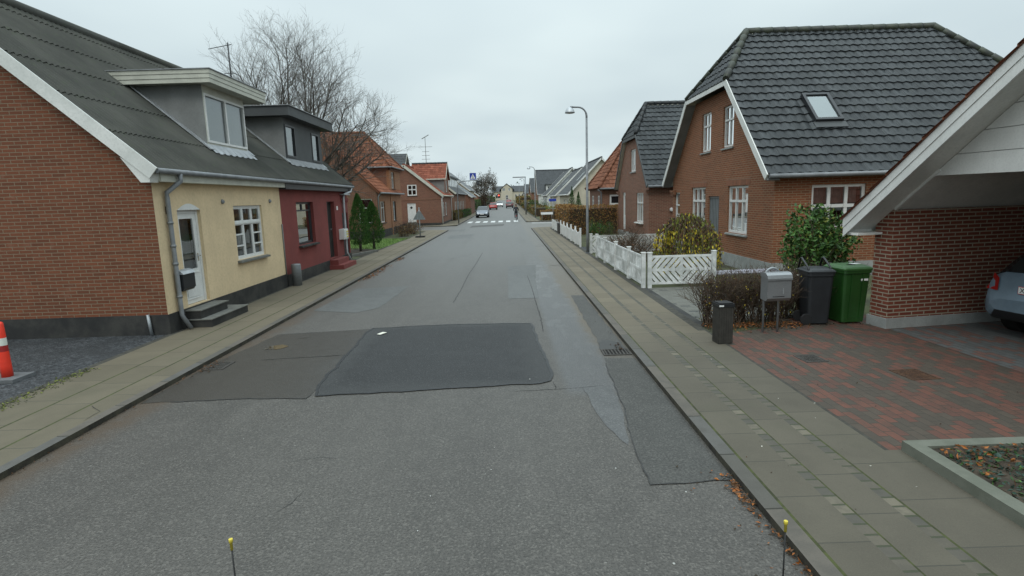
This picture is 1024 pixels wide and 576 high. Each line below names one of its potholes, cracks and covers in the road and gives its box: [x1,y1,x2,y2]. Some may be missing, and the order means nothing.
drain grate [600,348,632,356]
drain grate [201,361,236,370]
manhole cover [889,369,941,380]
manhole cover [793,354,829,363]
